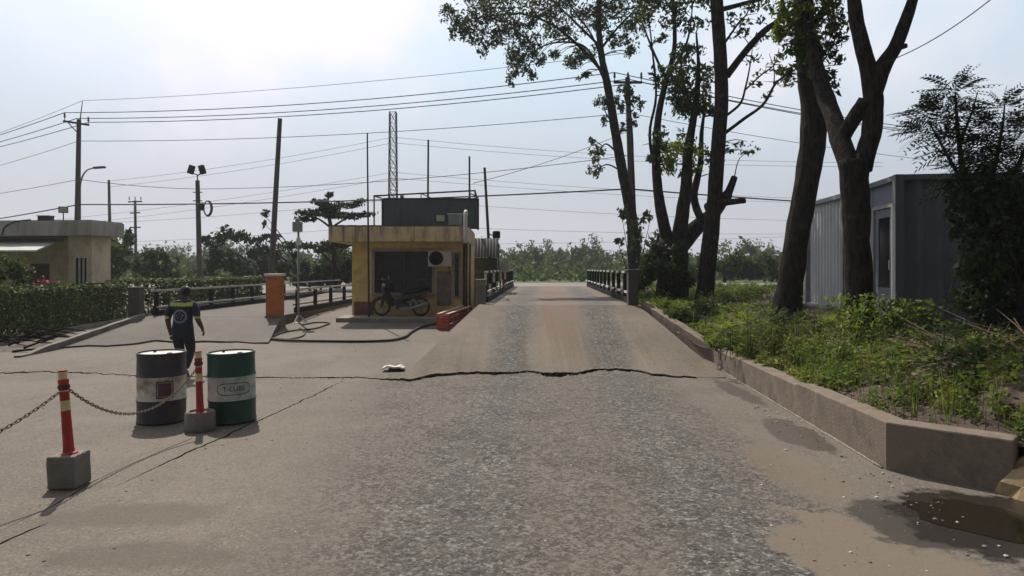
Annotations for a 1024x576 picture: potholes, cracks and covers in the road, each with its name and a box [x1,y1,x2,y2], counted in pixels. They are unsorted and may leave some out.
crack [0,368,696,545]
